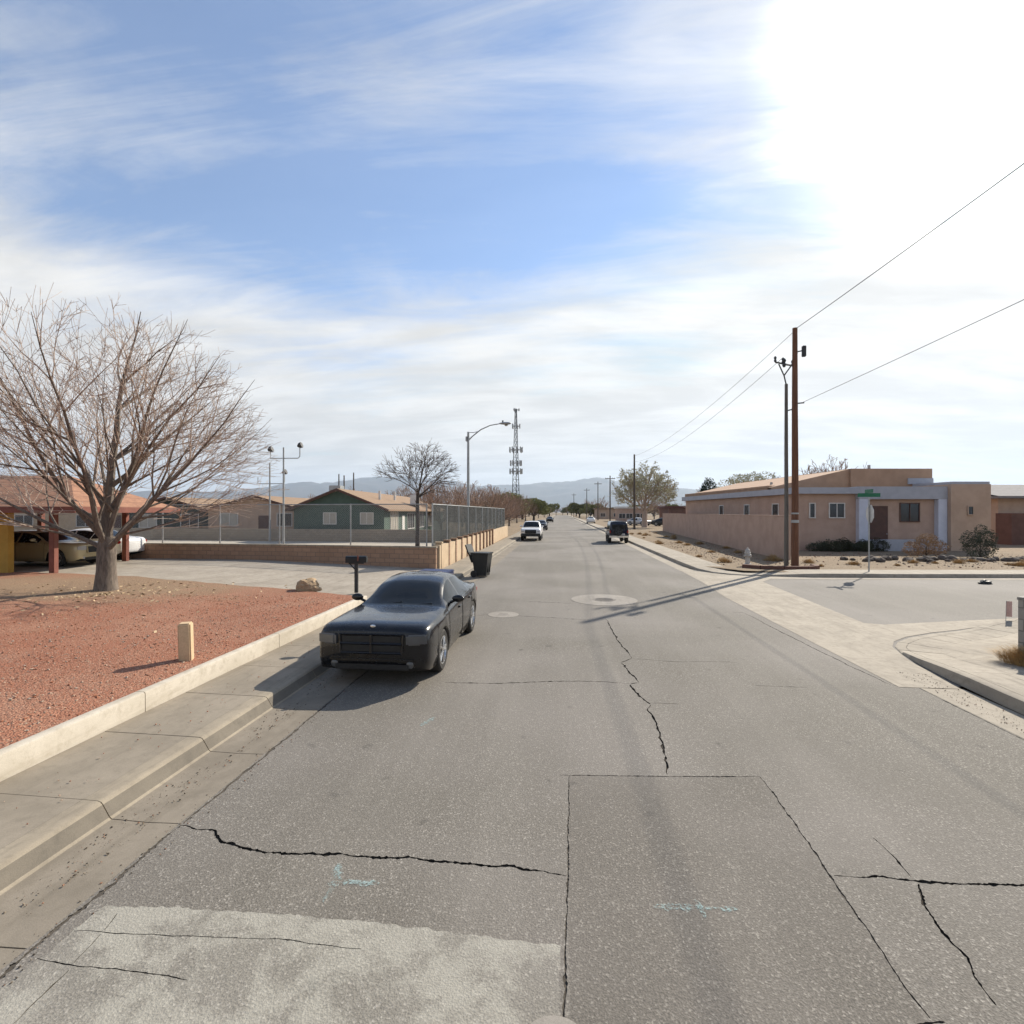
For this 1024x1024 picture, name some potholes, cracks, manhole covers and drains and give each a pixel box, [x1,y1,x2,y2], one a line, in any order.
crack [445,620,718,774]
crack [0,671,565,1024]
manhole cover [571,594,637,606]
crack [834,839,1024,1005]
